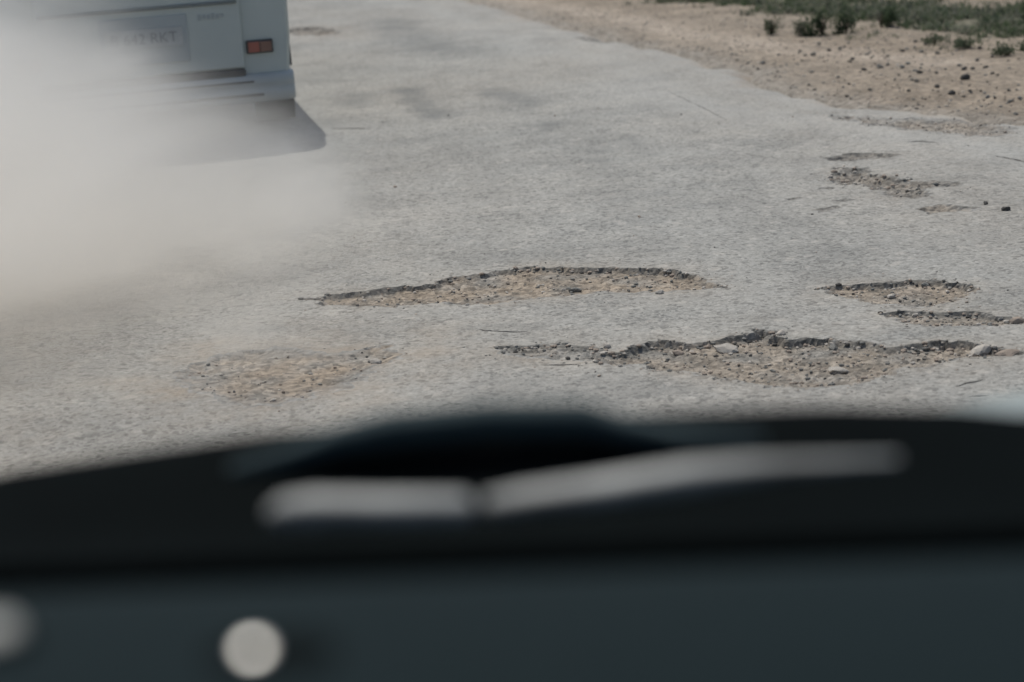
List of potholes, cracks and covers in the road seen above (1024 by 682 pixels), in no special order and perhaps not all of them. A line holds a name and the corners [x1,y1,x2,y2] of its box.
pothole [915,204,982,215]
pothole [882,311,1024,327]
pothole [171,344,405,409]
pothole [820,280,978,308]
pothole [298,266,730,308]
pothole [827,167,964,199]
pothole [819,151,903,162]
pothole [495,329,1024,391]
